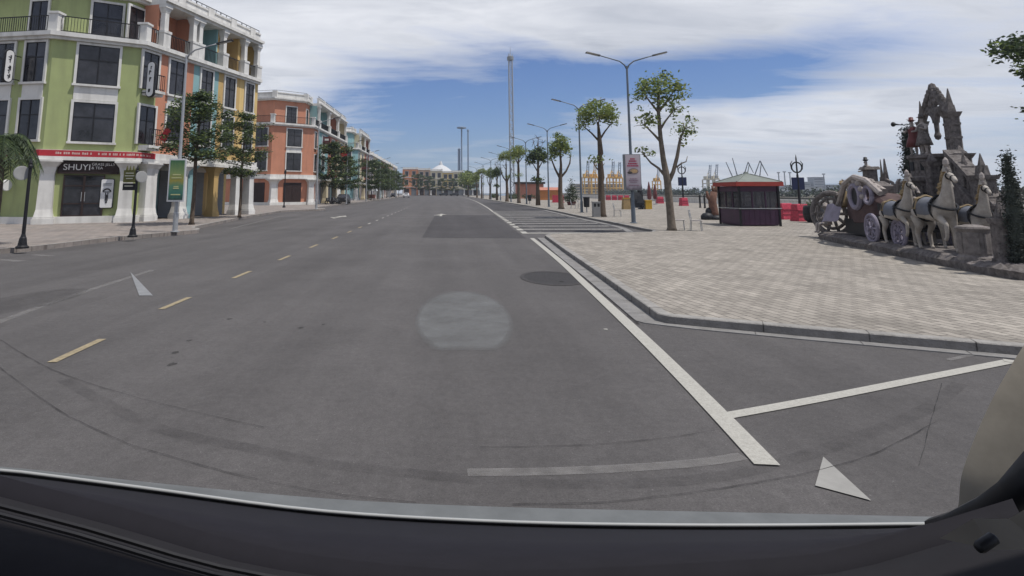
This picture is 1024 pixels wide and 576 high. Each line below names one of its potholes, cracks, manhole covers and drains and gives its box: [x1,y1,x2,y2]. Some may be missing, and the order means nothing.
manhole cover [520,271,586,286]
